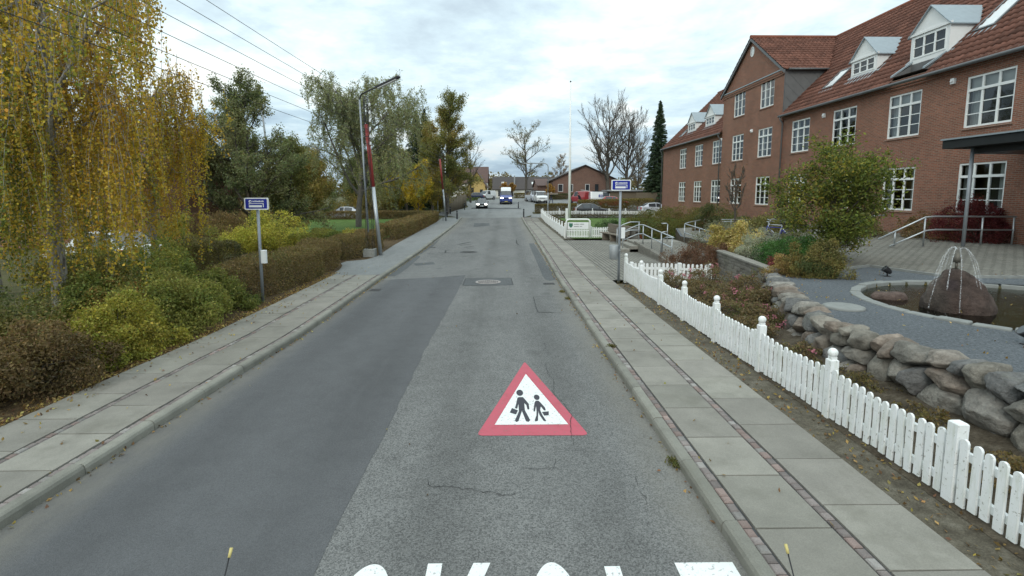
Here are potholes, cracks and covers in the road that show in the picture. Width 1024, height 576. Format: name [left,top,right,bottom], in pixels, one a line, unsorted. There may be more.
crack [428,482,517,496]
